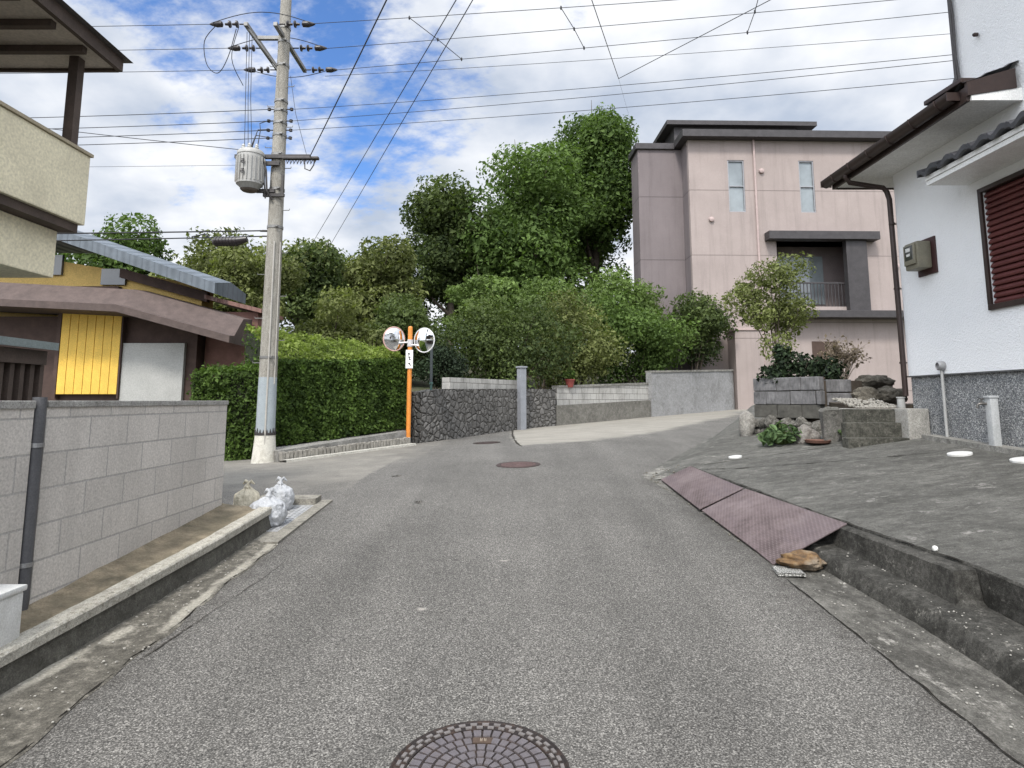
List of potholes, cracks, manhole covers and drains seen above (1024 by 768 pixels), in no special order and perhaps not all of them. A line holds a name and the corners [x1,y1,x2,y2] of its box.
manhole cover [389,721,570,768]
drain grate [254,495,333,544]
